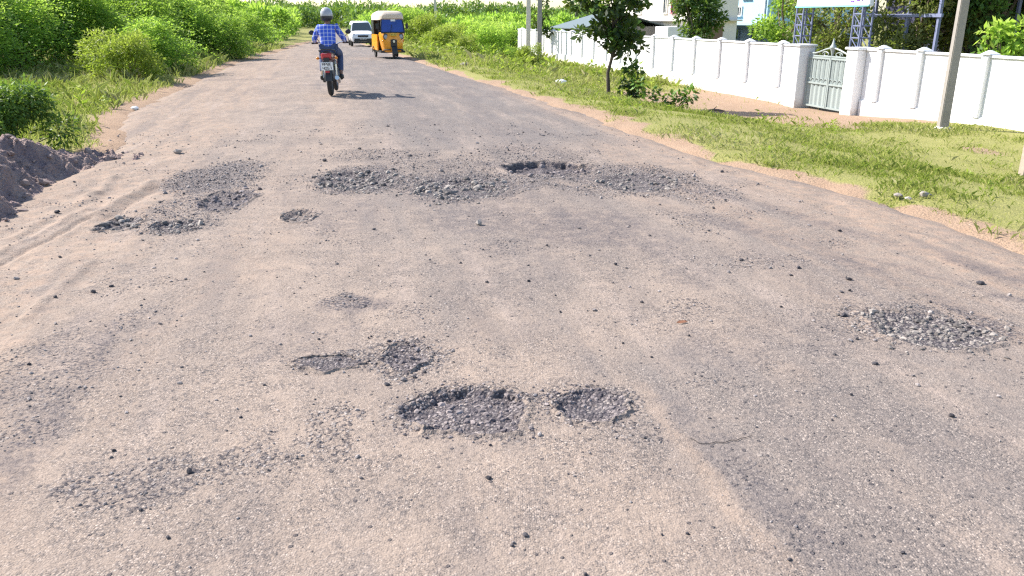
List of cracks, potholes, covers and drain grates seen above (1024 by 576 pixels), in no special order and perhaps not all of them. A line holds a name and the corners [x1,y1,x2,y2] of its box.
pothole [279,354,374,375]
pothole [188,186,265,217]
pothole [396,173,526,206]
pothole [576,169,697,196]
pothole [277,208,324,225]
pothole [85,215,149,233]
pothole [145,219,212,236]
pothole [374,339,440,375]
pothole [540,380,641,428]
pothole [836,305,1017,359]
pothole [303,165,418,195]
pothole [484,158,622,178]
